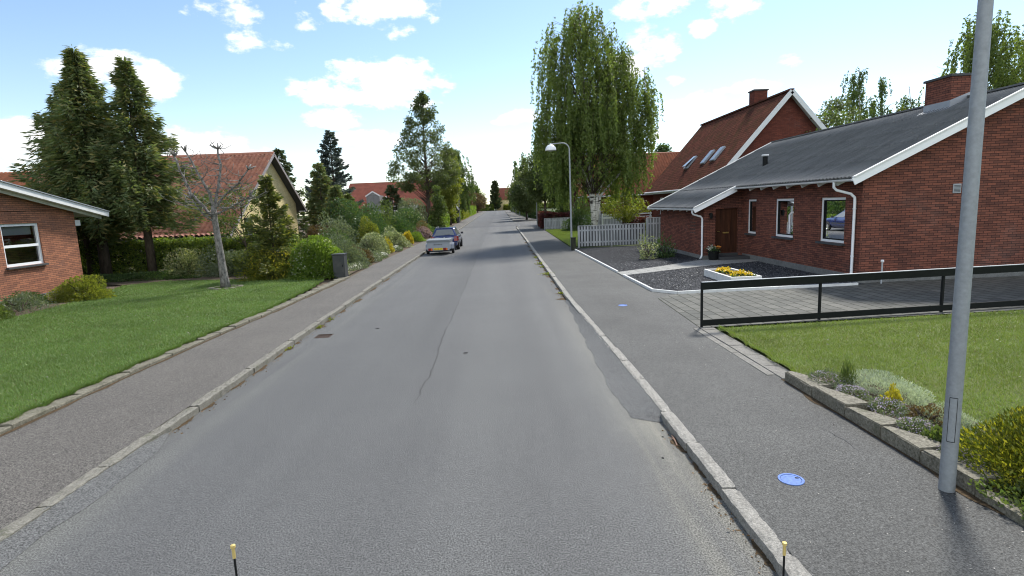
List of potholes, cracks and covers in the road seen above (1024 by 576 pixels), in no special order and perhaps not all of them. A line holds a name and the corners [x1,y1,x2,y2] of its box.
crack [415,263,475,401]
manhole cover [778,473,805,486]
